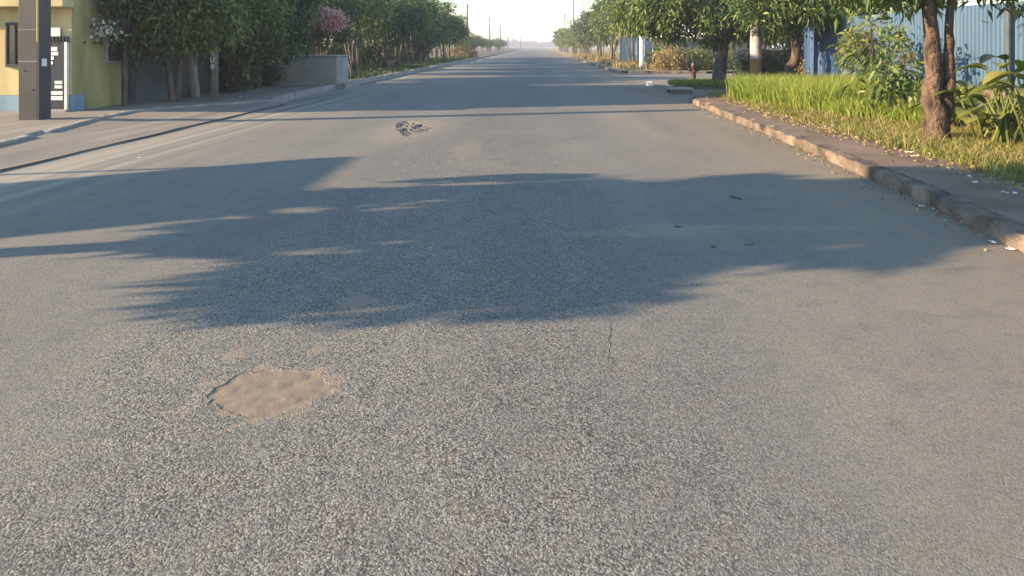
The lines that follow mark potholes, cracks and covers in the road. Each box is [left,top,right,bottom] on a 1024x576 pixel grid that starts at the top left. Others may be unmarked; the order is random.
pothole [395,121,433,136]
